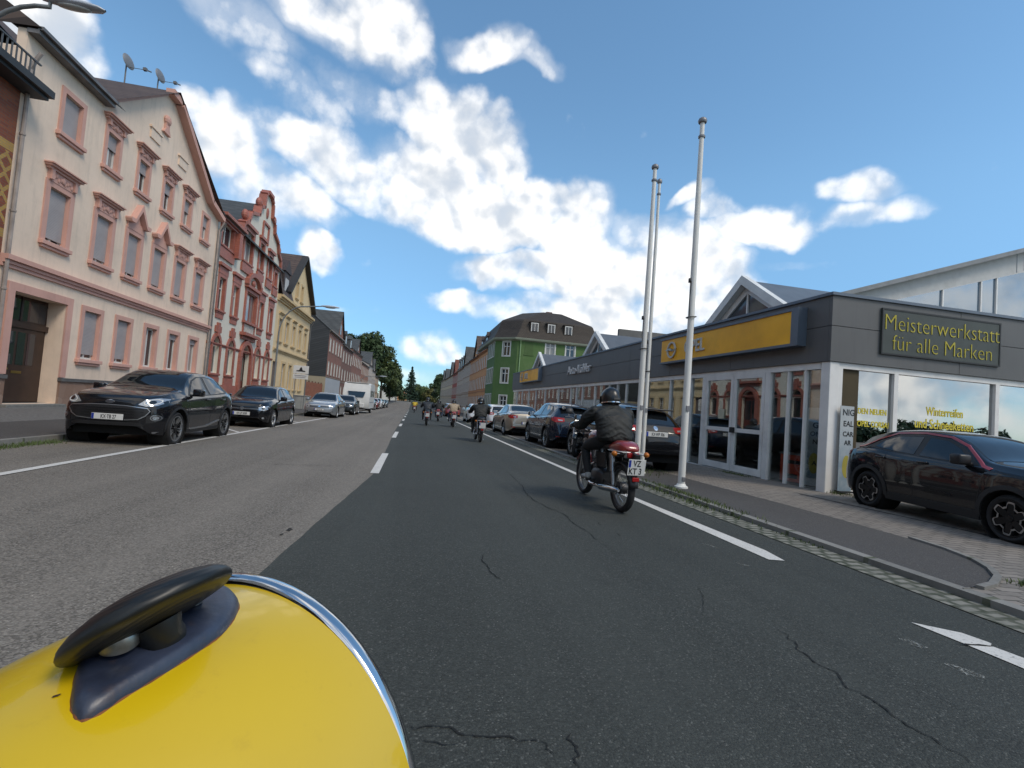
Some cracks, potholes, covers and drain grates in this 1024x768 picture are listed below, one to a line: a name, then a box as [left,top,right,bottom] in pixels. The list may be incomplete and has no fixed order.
crack [512,476,620,552]
crack [411,725,580,768]
crack [774,624,973,765]
